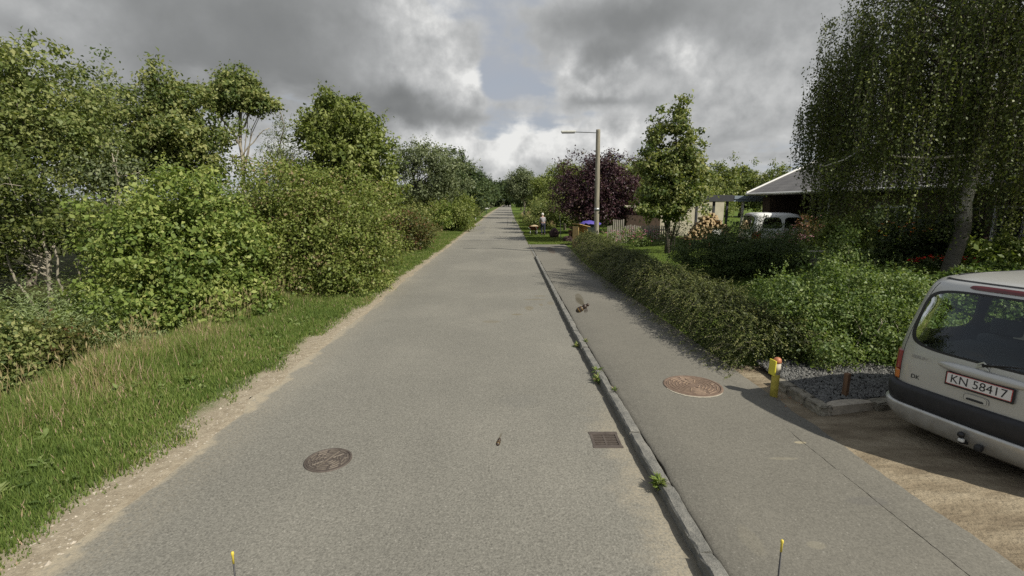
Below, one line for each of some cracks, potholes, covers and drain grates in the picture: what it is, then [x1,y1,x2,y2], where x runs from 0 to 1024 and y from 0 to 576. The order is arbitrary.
drain grate [588,432,624,448]
manhole cover [303,448,352,473]
manhole cover [663,375,724,398]
